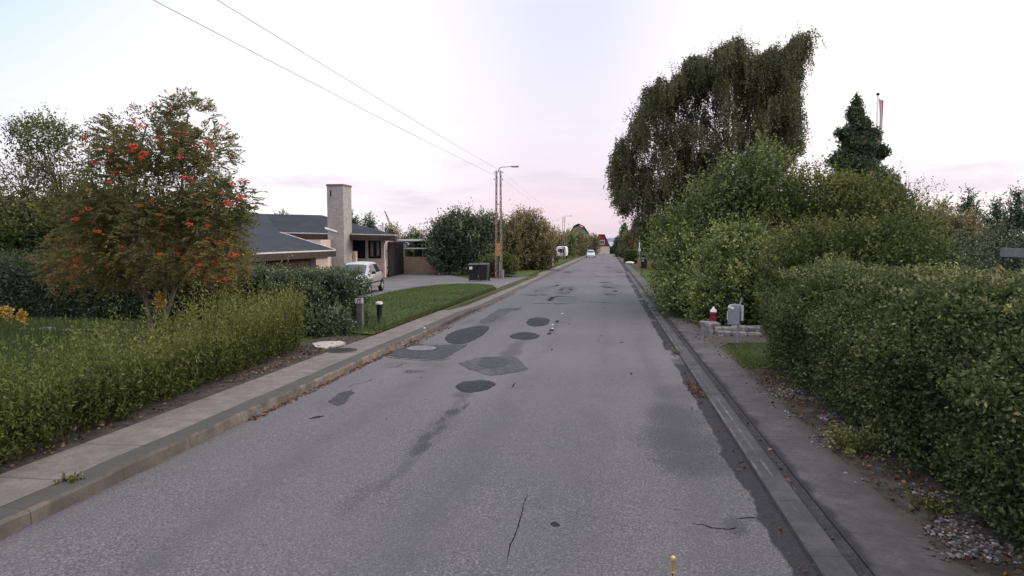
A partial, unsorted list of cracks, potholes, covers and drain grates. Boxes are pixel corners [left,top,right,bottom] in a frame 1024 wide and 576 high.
crack [692,517,755,530]
crack [506,494,528,563]
